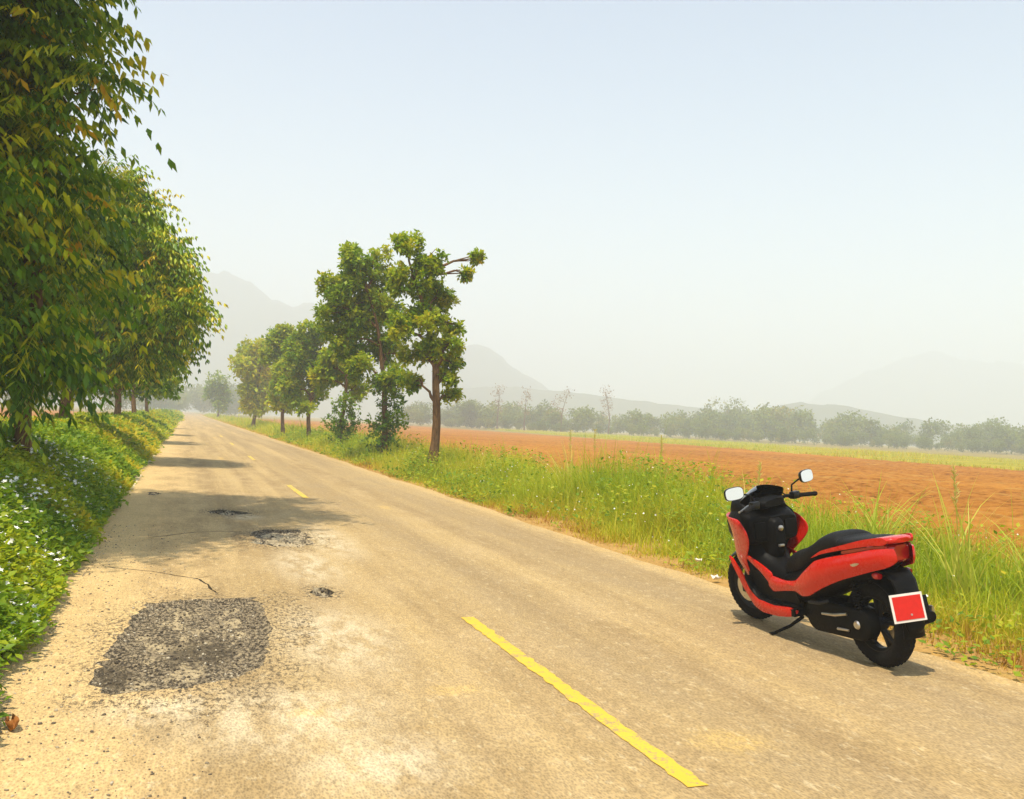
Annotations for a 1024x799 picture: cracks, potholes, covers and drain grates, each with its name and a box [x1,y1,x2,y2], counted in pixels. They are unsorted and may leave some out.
pothole [250,529,315,547]
crack [107,566,220,595]
pothole [310,587,334,597]
